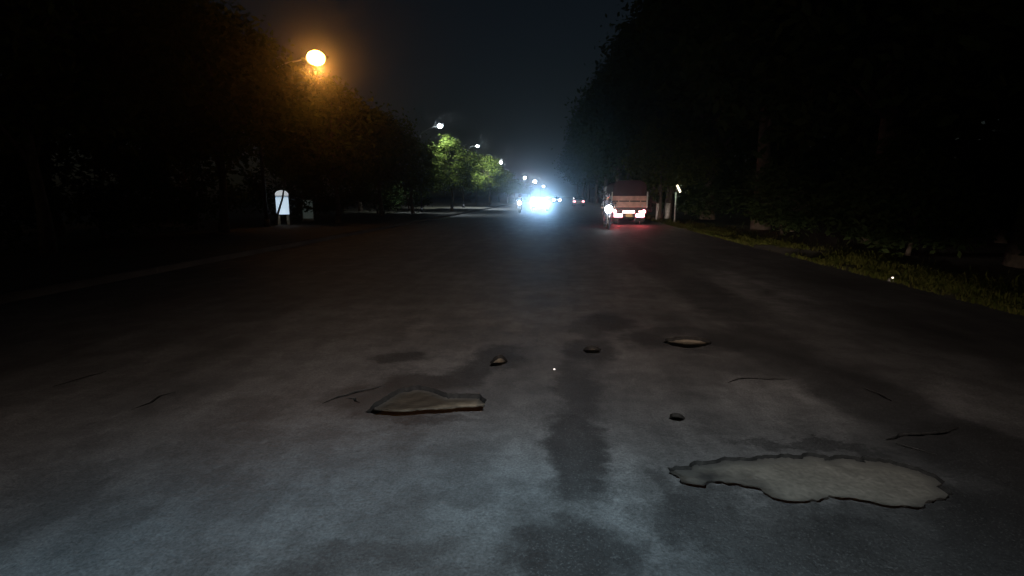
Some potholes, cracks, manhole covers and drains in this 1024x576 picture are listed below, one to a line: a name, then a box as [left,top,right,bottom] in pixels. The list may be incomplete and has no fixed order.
crack [886,427,960,455]
pothole [669,413,685,421]
pothole [664,336,712,348]
pothole [490,355,508,366]
pothole [668,452,953,510]
crack [322,385,385,404]
crack [52,371,106,387]
crack [131,392,174,410]
